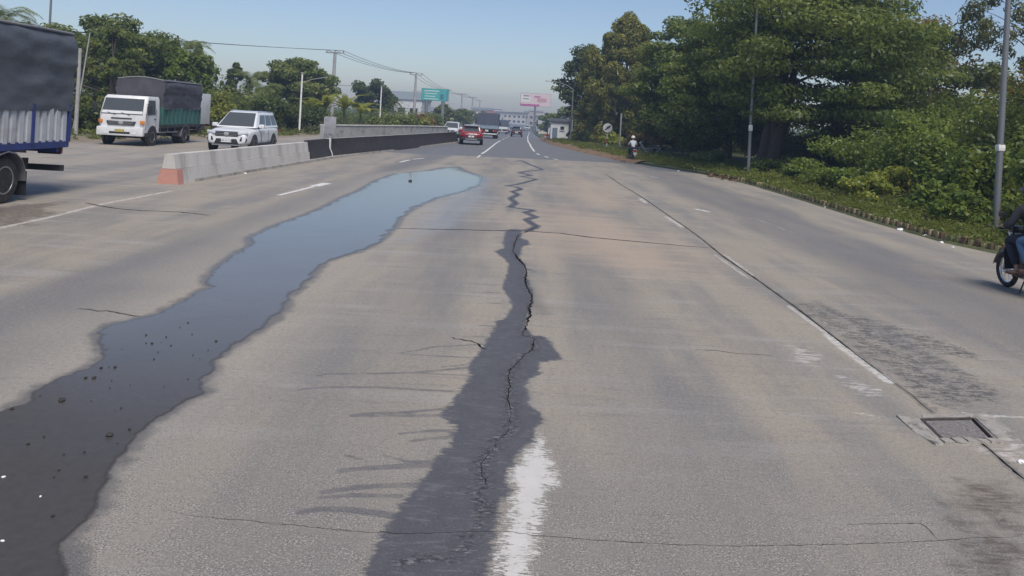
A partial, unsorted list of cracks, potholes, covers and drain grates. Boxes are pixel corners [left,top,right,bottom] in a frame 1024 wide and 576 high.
manhole cover [896,414,1021,446]
crack [401,179,707,512]
crack [87,203,204,215]
crack [167,510,1008,547]
